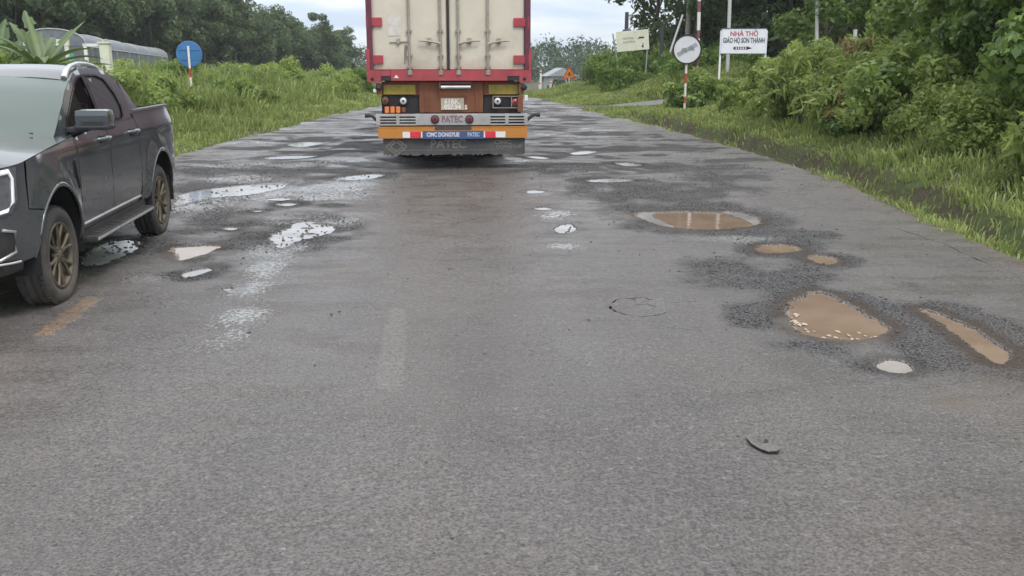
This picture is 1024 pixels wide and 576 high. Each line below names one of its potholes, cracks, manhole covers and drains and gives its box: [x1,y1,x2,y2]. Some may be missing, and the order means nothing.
pothole [782,290,892,340]
pothole [267,220,336,248]
pothole [632,210,761,230]
pothole [553,223,578,233]
pothole [168,244,222,260]
pothole [180,267,214,278]
pothole [918,308,1014,365]
pothole [80,238,144,266]
pothole [807,254,839,264]
pothole [172,182,289,206]
pothole [873,359,915,373]
pothole [754,244,802,253]
